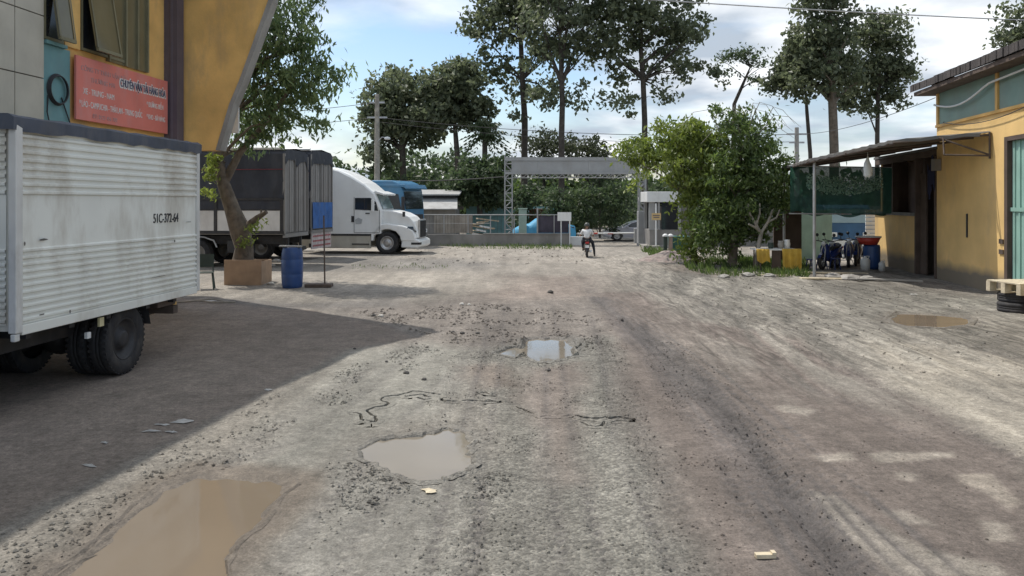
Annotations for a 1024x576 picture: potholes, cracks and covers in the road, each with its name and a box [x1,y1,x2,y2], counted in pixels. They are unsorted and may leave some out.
pothole [491,335,586,364]
crack [350,390,635,429]
pothole [882,310,978,328]
pothole [38,465,301,576]
pothole [346,424,482,486]
